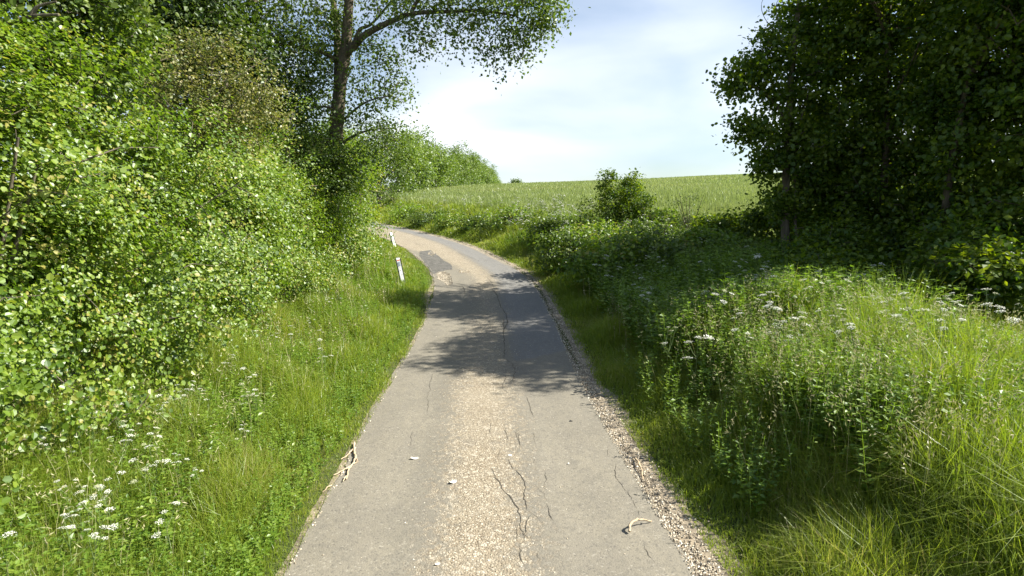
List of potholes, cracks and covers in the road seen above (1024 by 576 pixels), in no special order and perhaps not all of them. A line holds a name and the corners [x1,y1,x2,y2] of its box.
crack [489,423,554,561]
